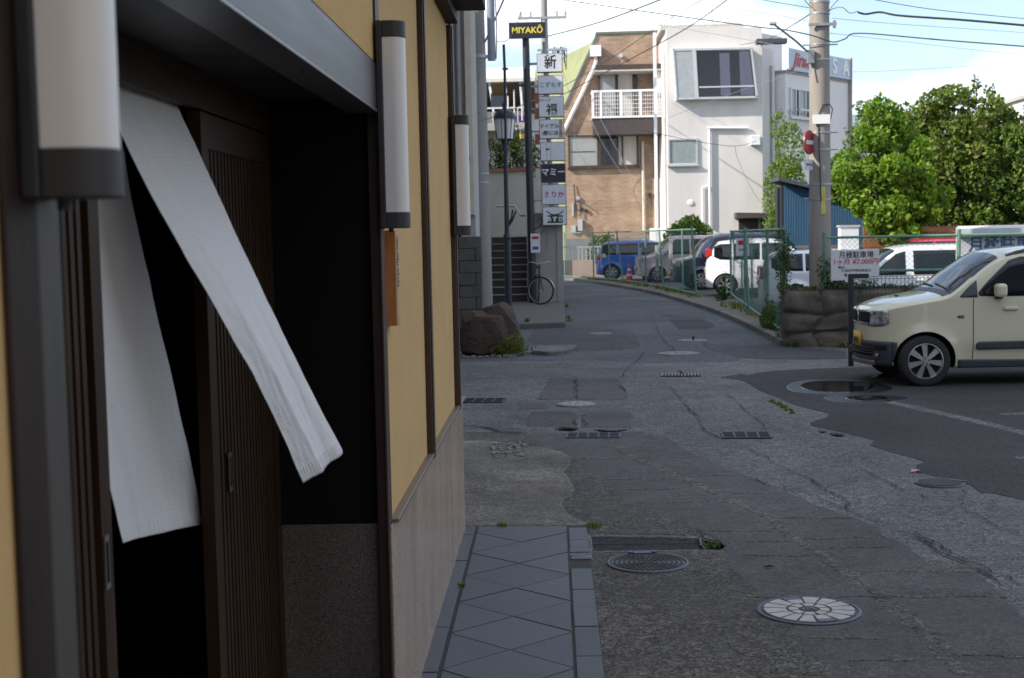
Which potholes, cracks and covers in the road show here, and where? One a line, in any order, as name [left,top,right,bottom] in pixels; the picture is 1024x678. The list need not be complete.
manhole cover [607,550,689,574]
drain grate [721,431,773,439]
crack [663,379,1024,595]
manhole cover [757,596,862,626]
manhole cover [915,478,966,488]
